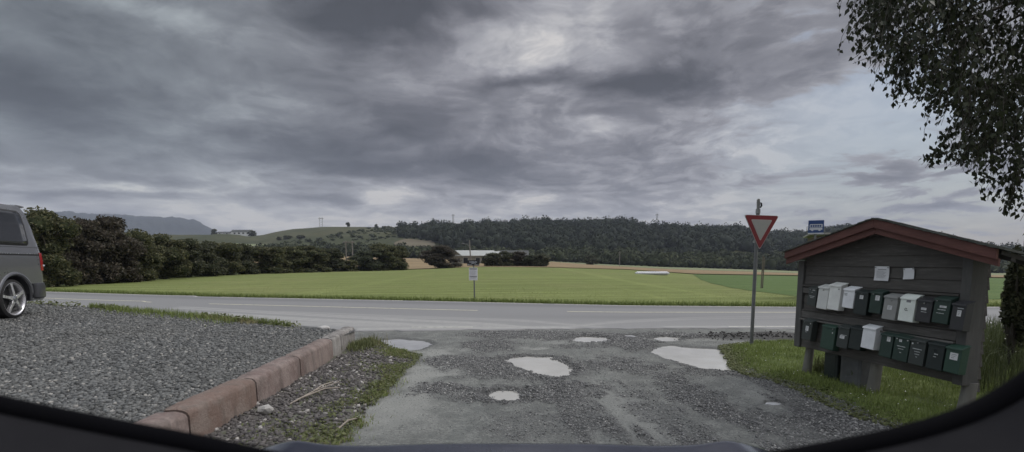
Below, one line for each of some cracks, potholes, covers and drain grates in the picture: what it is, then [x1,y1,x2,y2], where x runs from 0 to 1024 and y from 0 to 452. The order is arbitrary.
pothole [478,386,534,401]
pothole [499,354,580,378]
pothole [646,344,748,371]
pothole [377,337,436,350]
